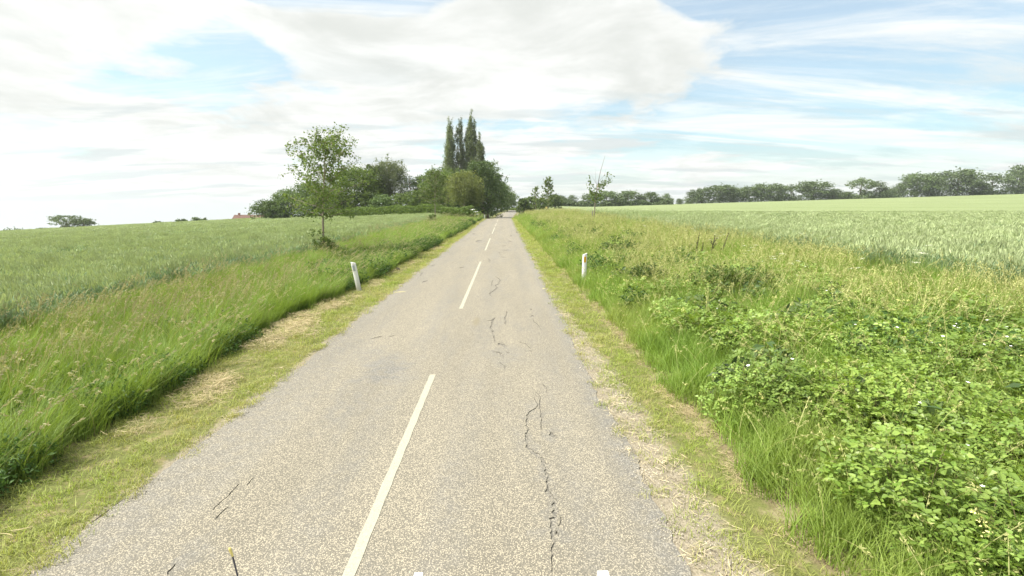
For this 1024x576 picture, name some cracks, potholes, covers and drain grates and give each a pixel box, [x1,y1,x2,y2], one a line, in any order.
crack [525,385,562,571]
crack [488,259,541,369]
crack [167,478,253,574]
